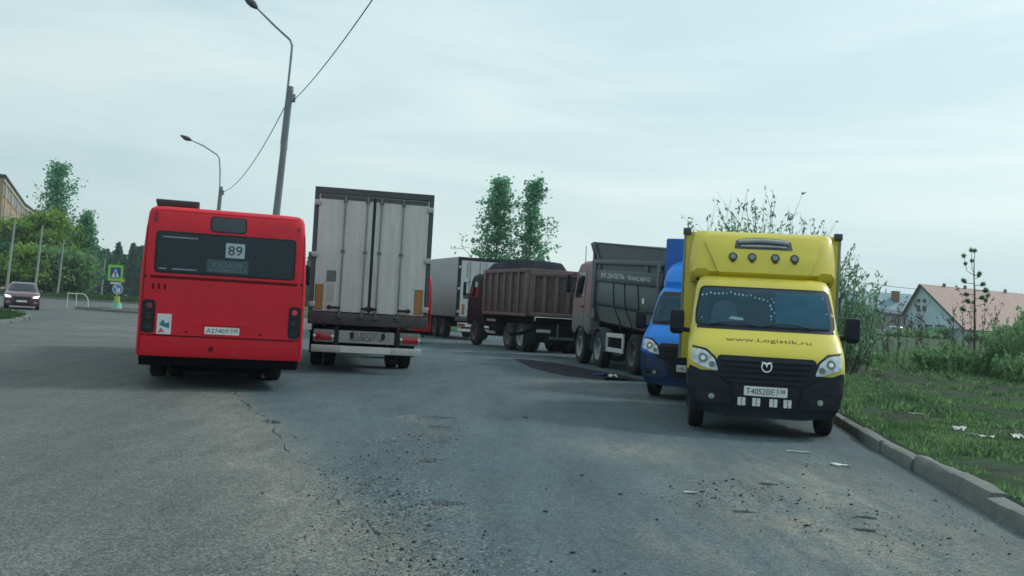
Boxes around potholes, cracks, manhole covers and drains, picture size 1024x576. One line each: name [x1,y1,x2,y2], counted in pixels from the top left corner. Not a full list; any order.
crack [228,385,296,454]
